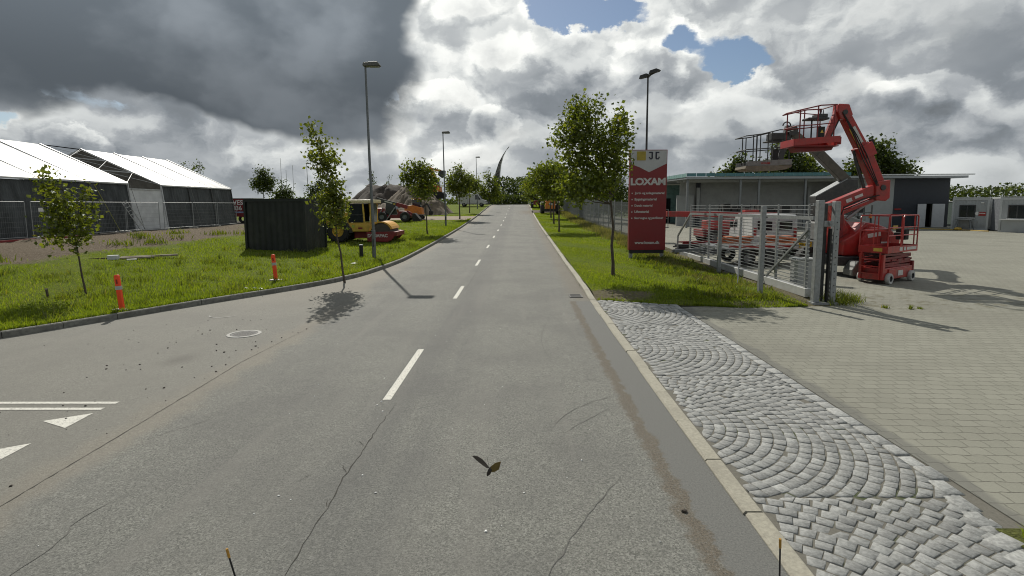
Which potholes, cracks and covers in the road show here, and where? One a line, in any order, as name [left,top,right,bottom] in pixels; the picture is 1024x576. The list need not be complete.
manhole cover [226,330,262,338]
crack [9,491,130,576]
crack [548,475,622,576]
crack [285,408,393,575]
